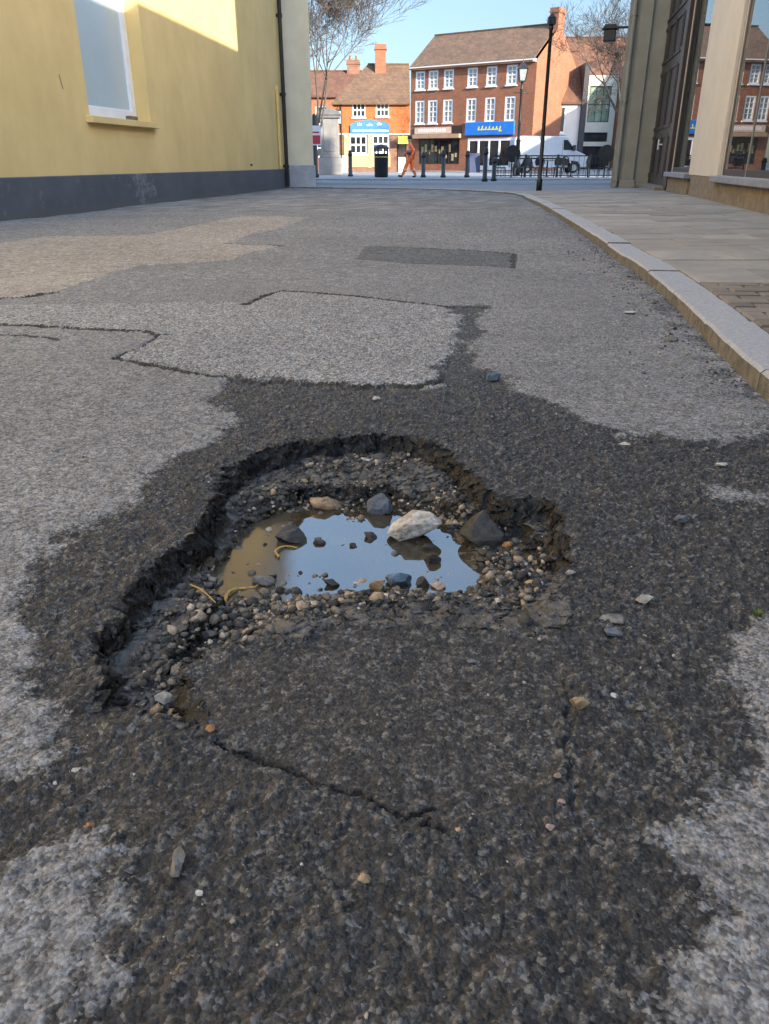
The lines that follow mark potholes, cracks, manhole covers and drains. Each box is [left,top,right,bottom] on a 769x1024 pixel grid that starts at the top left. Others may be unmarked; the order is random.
crack [559,681,581,815]
pothole [85,432,574,740]
crack [237,290,487,309]
crack [0,323,448,391]
crack [218,743,447,833]
crack [0,292,60,300]
